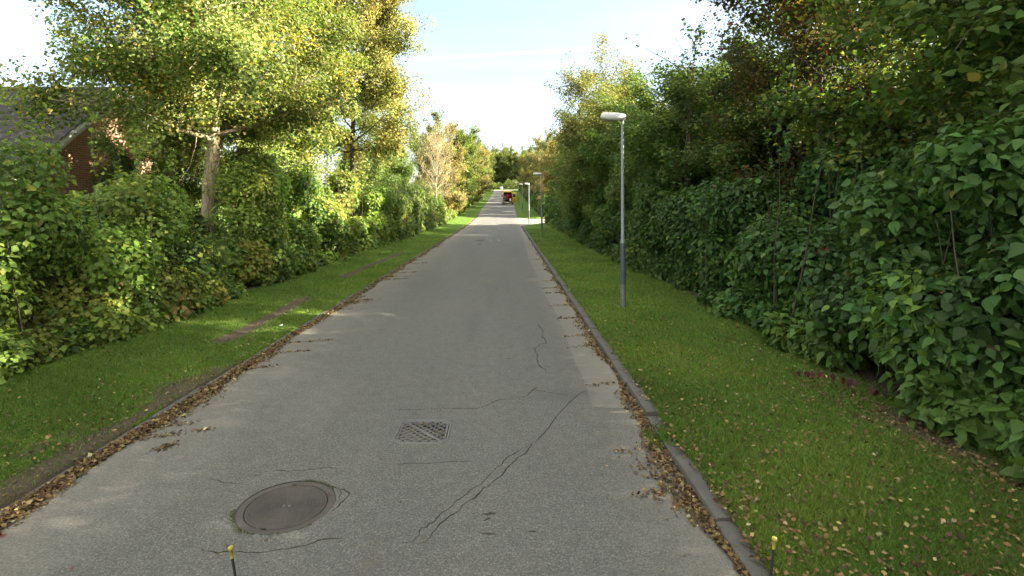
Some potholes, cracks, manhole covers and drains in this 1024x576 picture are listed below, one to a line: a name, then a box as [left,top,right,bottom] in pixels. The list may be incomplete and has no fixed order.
crack [398,323,585,544]
manhole cover [225,479,338,537]
crack [201,538,337,554]
